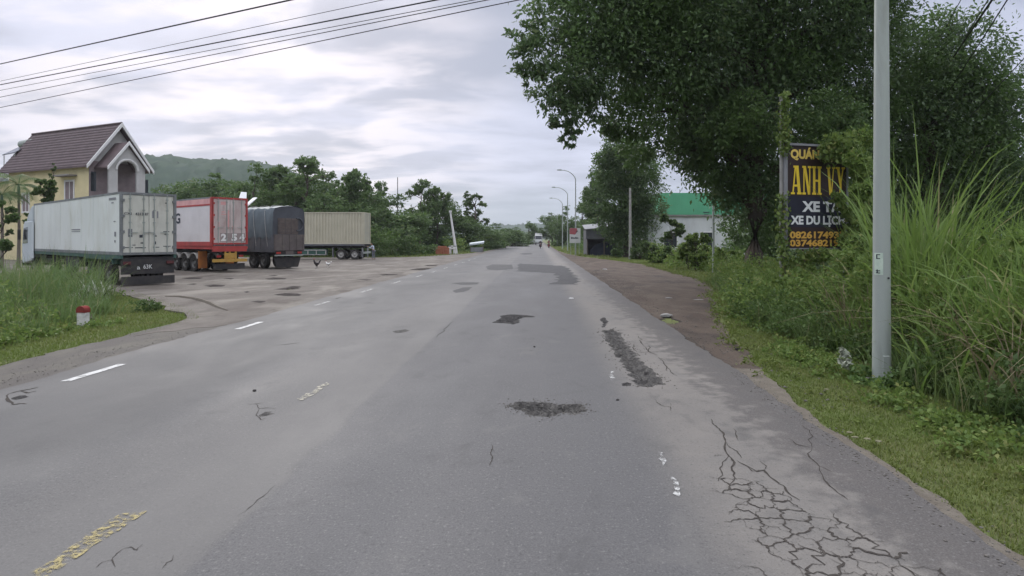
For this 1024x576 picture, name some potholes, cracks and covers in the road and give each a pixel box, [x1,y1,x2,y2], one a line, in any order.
crack [5,387,37,405]
pothole [602,329,666,387]
pothole [492,314,535,324]
pothole [505,402,587,417]
crack [711,419,946,576]
